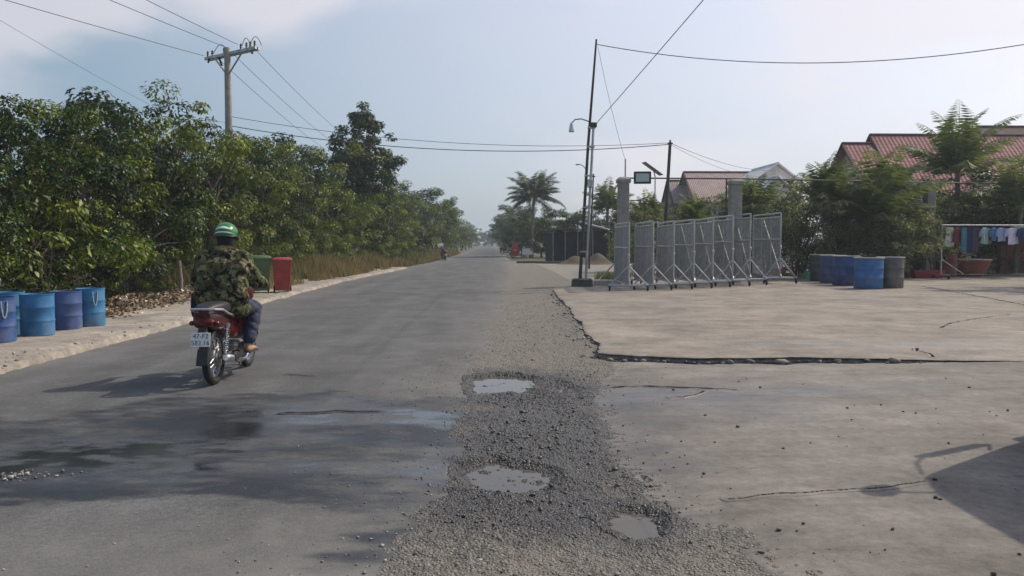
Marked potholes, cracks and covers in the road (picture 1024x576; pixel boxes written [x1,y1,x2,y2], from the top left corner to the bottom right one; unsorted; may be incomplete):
crack [612,348,1012,365]
pothole [460,371,595,411]
crack [917,286,1024,329]
crack [598,385,742,399]
pothole [447,451,578,497]
crack [719,479,935,502]
pothole [586,501,683,547]
